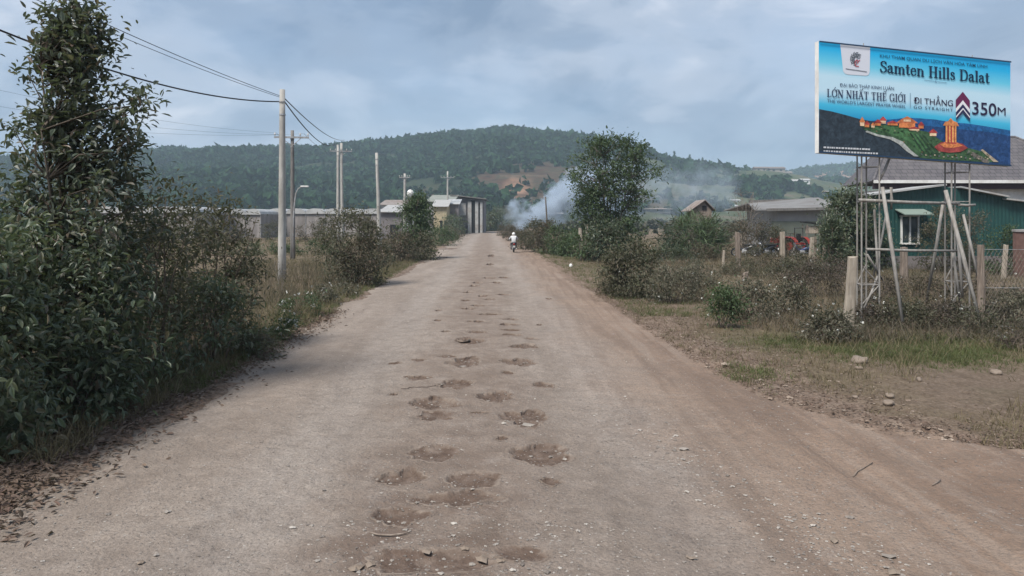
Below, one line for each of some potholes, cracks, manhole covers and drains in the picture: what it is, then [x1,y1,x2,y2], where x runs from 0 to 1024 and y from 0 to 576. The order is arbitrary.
pothole [436,378,477,390]
pothole [371,466,431,487]
pothole [485,545,551,563]
pothole [364,547,503,575]
pothole [416,410,455,422]
pothole [539,477,562,487]
pothole [442,469,503,490]
pothole [505,442,576,468]
pothole [441,356,483,368]
pothole [497,358,538,367]
pothole [406,488,509,509]
pothole [406,395,463,413]
